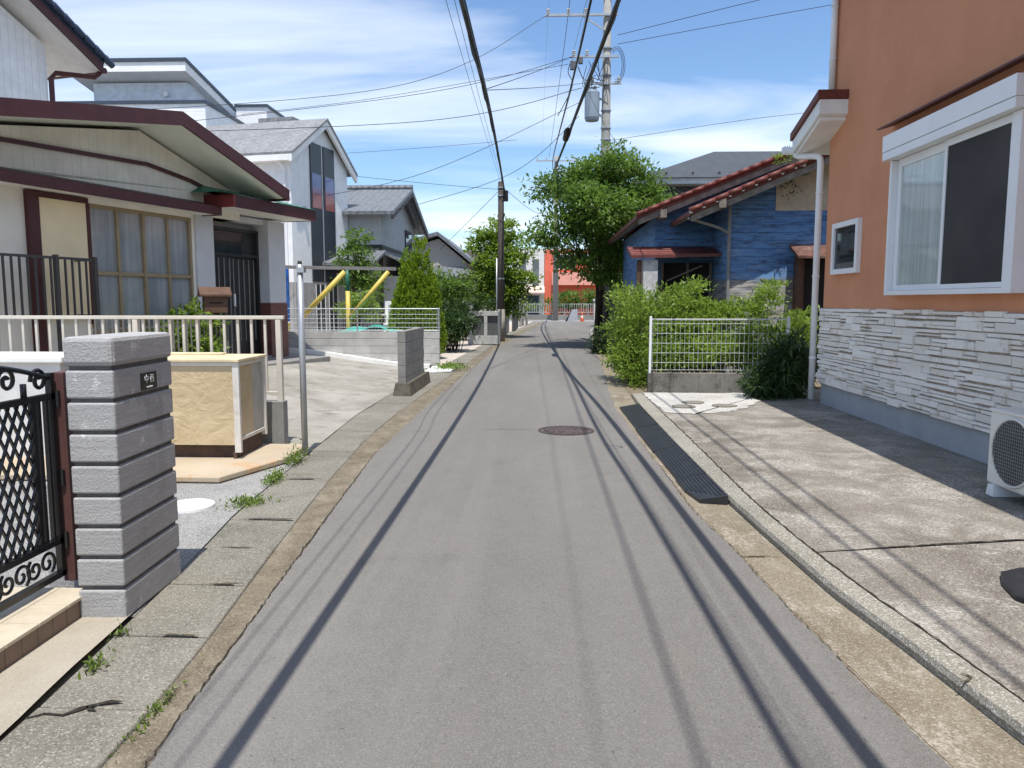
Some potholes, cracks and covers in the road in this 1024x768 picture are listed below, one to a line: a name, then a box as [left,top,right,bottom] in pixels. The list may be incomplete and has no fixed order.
manhole cover [538,426,594,436]
